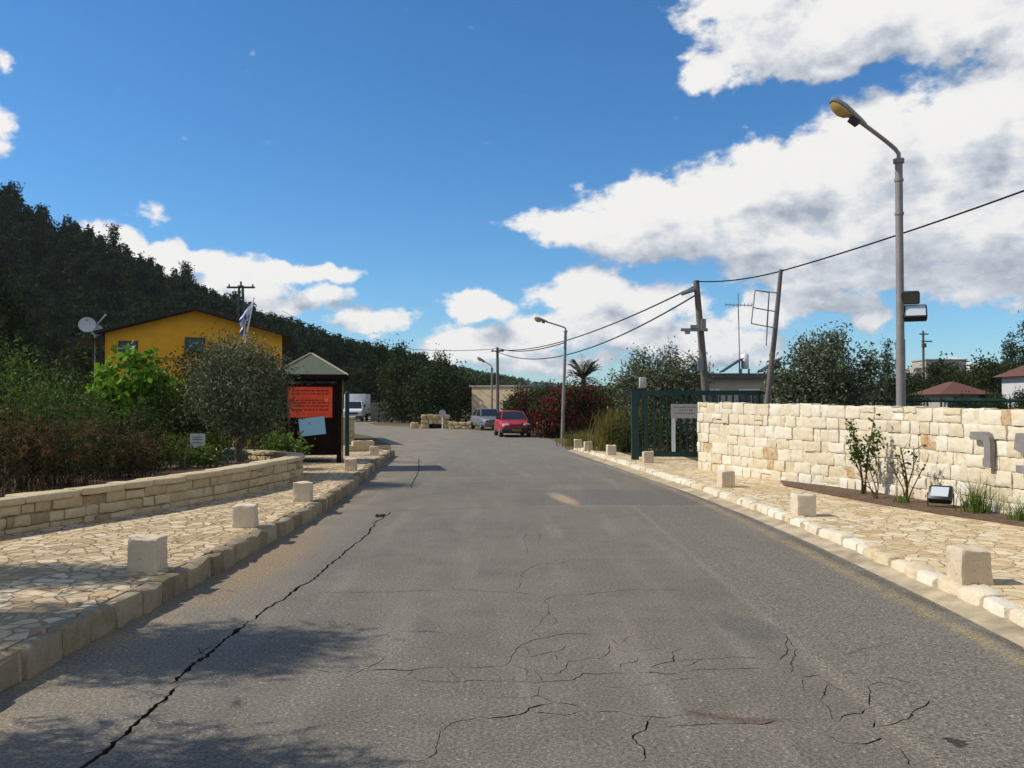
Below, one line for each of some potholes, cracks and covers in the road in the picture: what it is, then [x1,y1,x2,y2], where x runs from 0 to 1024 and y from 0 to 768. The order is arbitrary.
crack [779,633,930,768]
crack [79,512,391,768]
crack [311,533,802,762]
